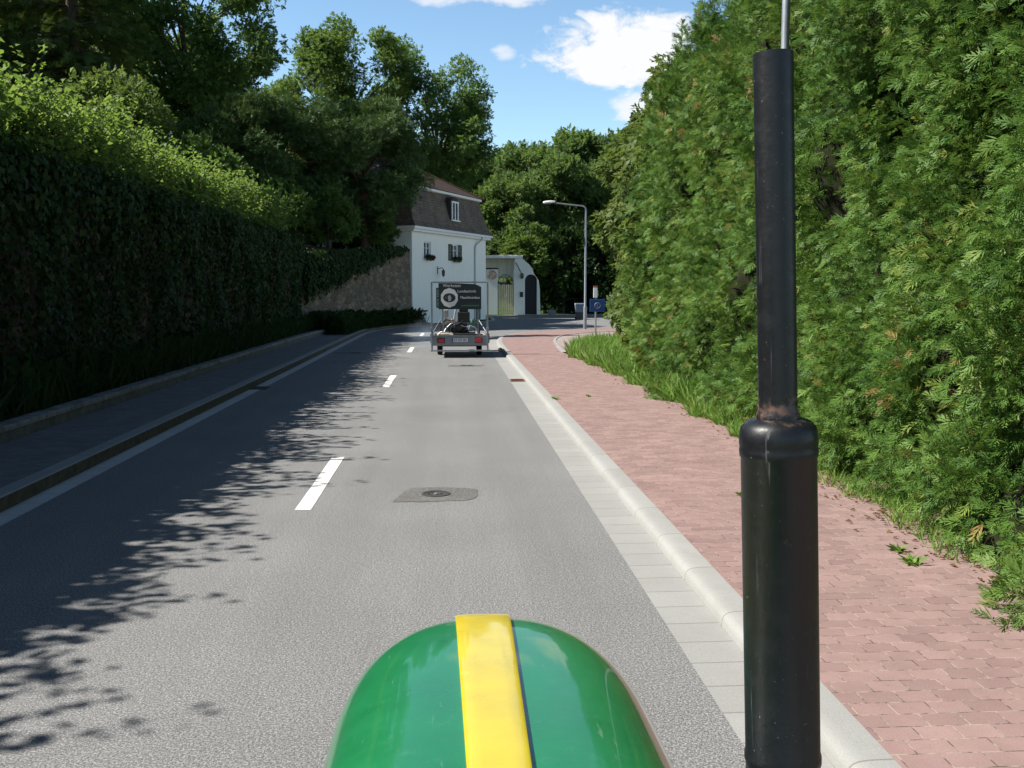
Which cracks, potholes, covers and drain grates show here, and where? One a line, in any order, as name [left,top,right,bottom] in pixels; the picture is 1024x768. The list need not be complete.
manhole cover [393,487,478,502]
